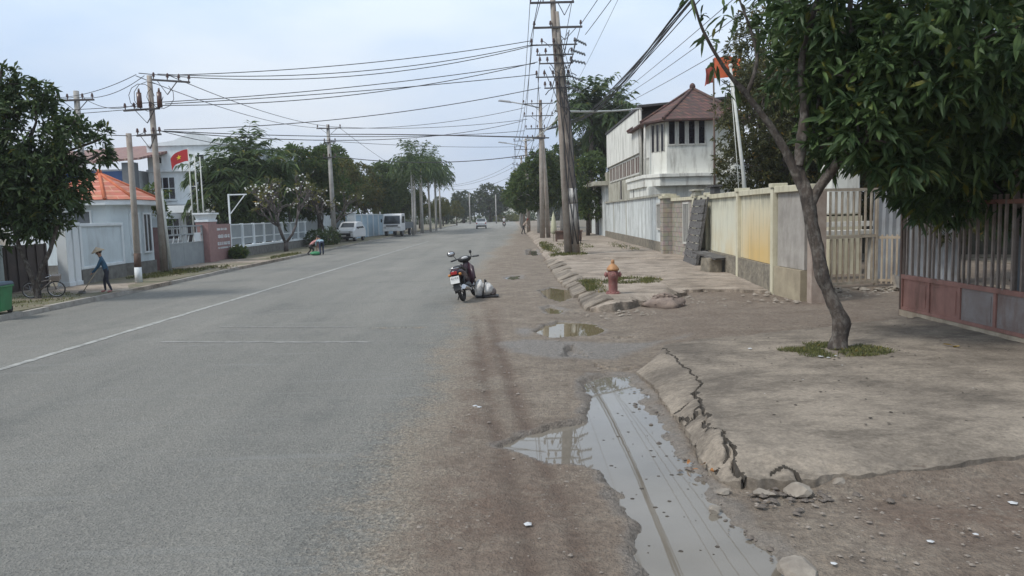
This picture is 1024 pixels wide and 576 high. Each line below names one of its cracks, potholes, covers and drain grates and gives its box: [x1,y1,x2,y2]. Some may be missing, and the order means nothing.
pothole [535,287,572,302]
pothole [530,320,609,339]
crack [770,465,801,483]
crack [661,348,747,484]
pothole [490,371,822,576]
